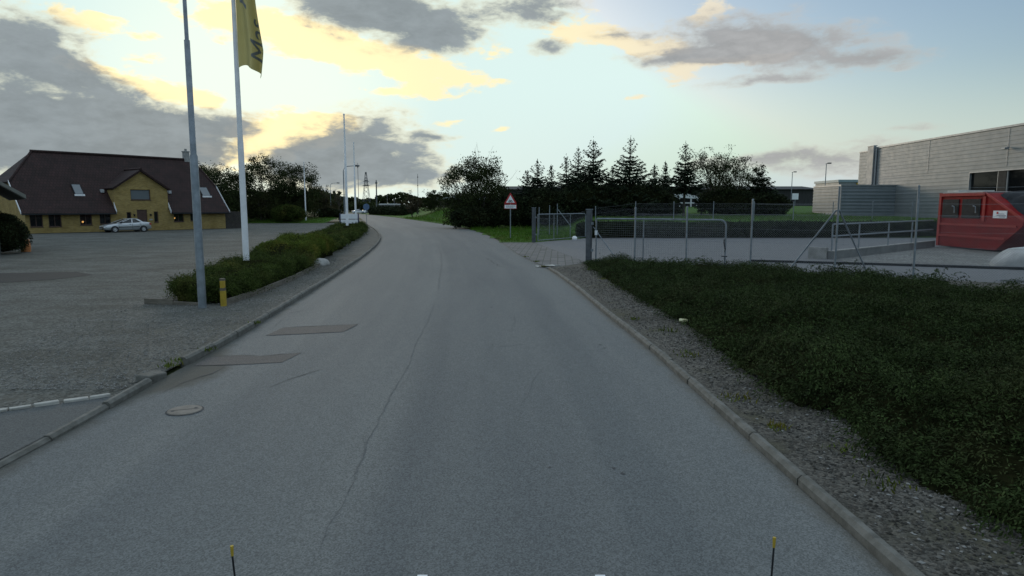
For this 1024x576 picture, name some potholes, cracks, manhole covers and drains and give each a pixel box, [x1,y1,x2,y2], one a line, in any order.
manhole cover [165,405,204,416]
crack [319,239,475,551]
